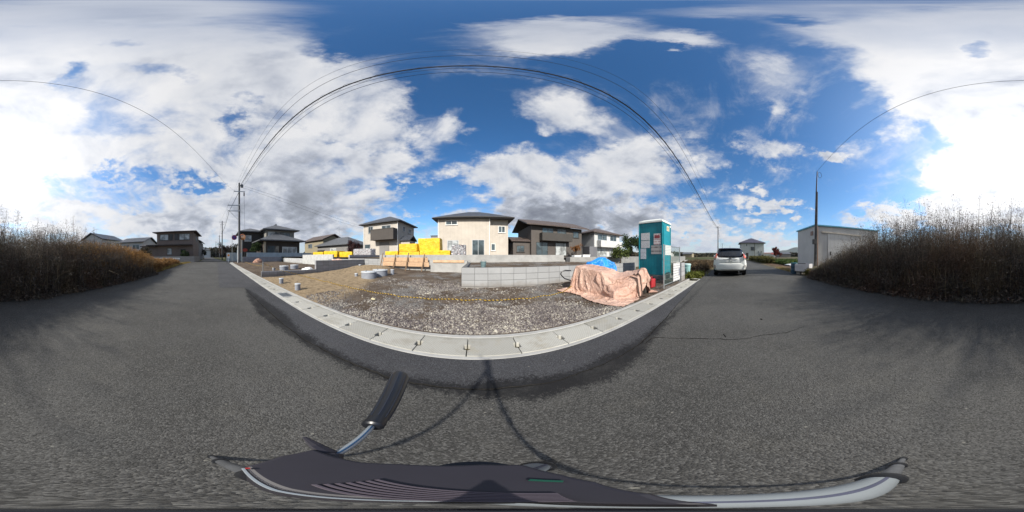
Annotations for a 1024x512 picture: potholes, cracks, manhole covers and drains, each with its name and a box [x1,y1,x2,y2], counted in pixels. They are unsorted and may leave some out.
crack [644,325,806,344]
